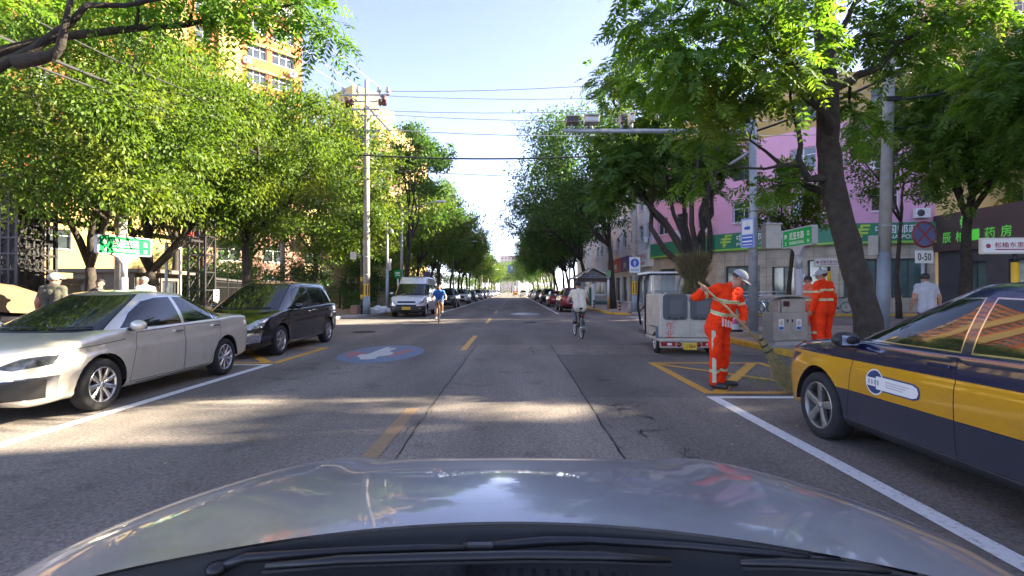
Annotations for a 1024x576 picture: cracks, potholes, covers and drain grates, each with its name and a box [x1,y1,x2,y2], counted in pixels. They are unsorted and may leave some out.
crack [502,345,699,459]
